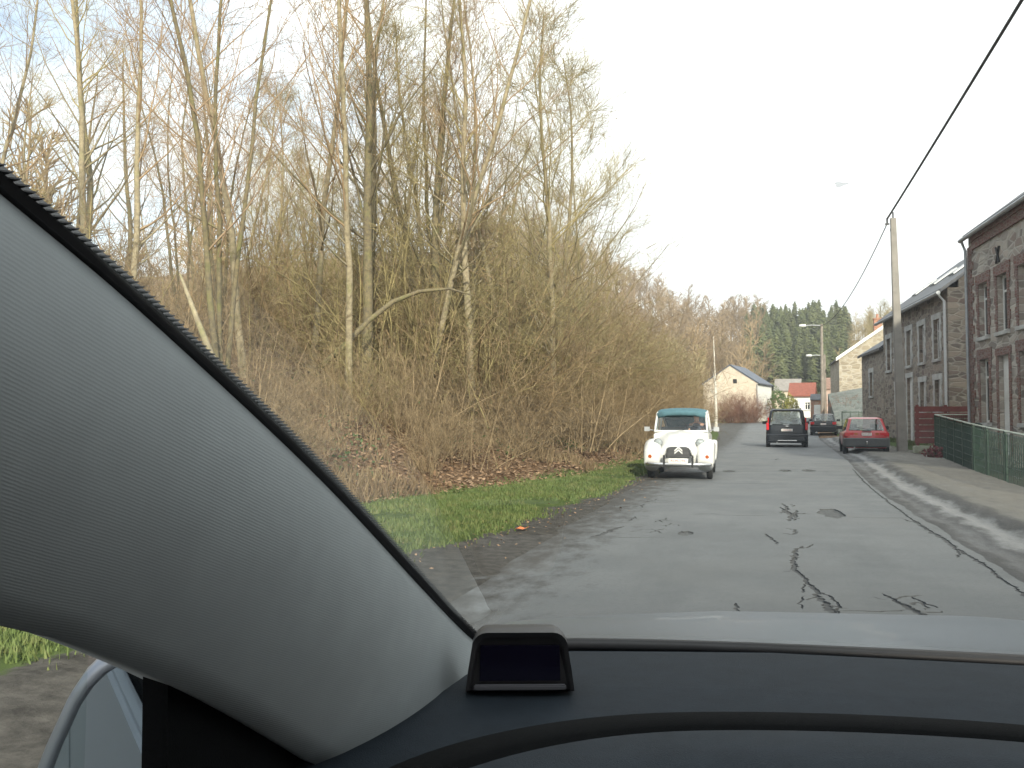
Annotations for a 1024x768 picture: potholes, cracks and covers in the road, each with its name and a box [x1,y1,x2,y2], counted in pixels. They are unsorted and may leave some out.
pothole [816,509,846,519]
crack [589,499,679,538]
crack [765,504,820,591]
